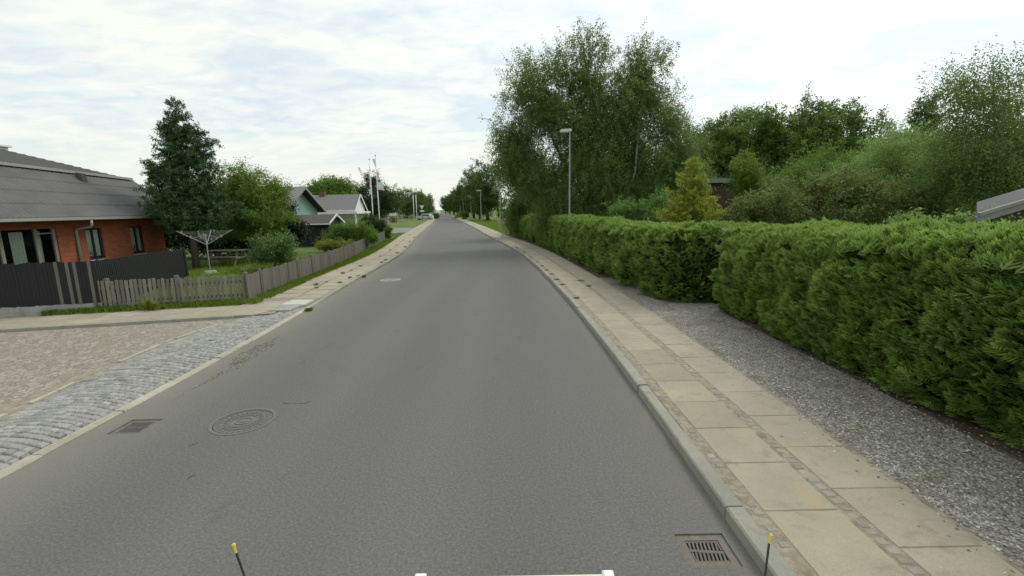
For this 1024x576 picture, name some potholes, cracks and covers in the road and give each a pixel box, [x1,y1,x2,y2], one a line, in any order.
manhole cover [208,408,277,436]
drain grate [675,533,743,567]
drain grate [108,419,162,434]
